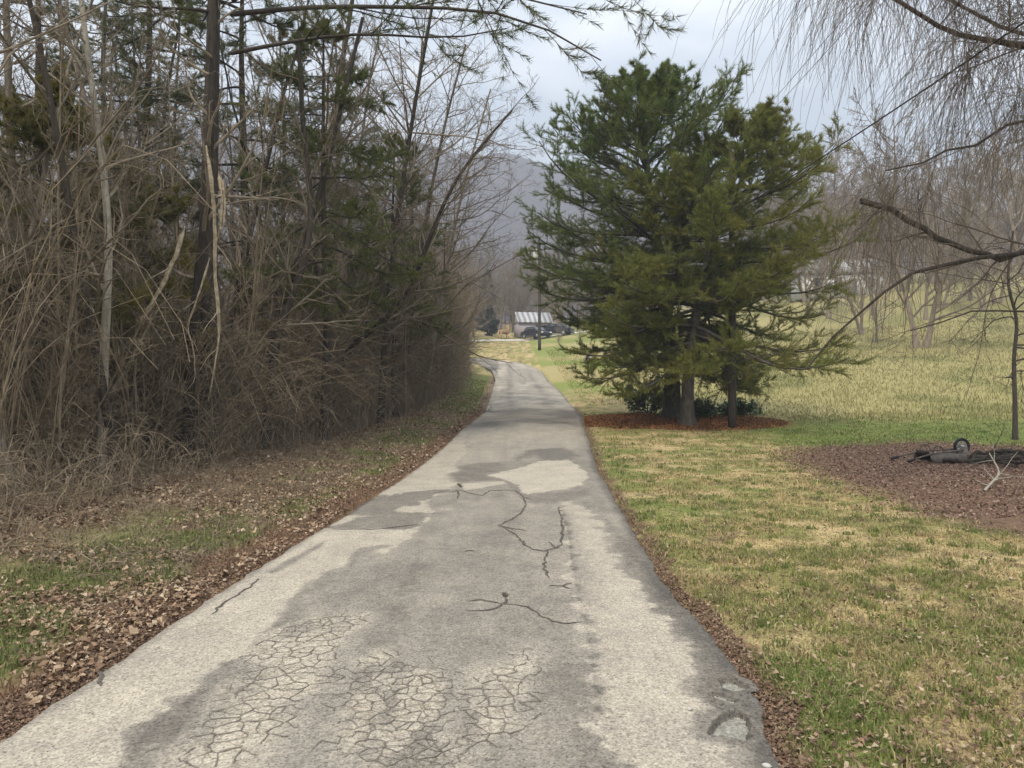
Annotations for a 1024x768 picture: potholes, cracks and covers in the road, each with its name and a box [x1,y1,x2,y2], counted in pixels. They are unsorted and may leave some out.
crack [466,598,581,624]
crack [178,608,548,768]
pothole [696,705,765,746]
crack [210,578,258,615]
crack [436,490,573,589]
